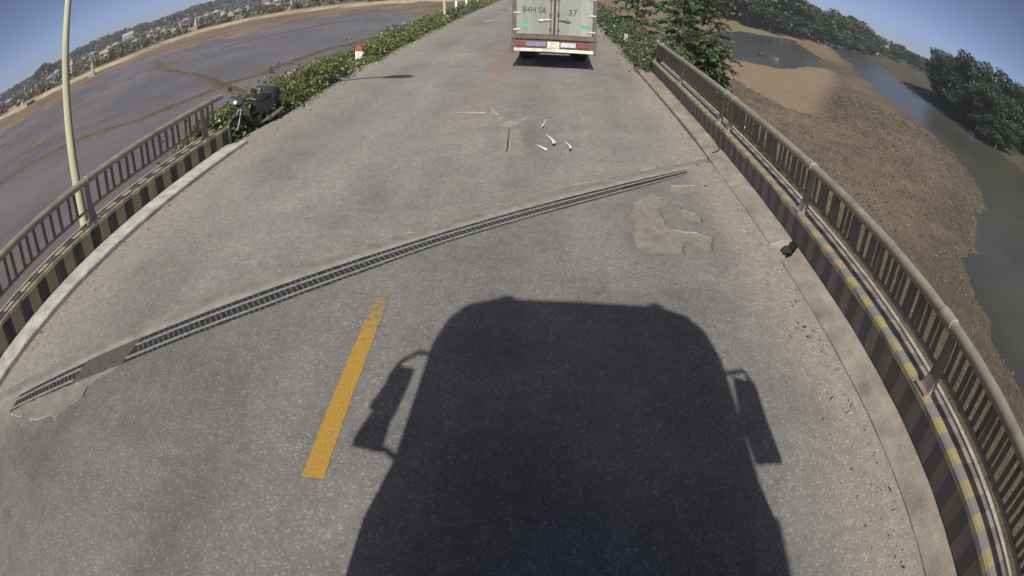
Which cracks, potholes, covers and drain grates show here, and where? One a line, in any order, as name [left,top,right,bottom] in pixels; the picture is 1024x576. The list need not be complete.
crack [503,127,512,154]
